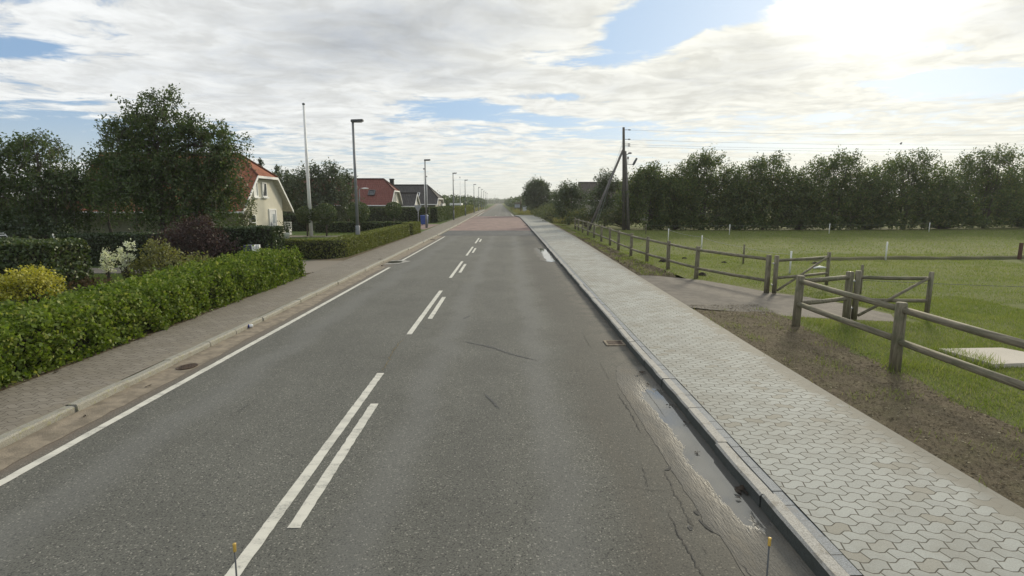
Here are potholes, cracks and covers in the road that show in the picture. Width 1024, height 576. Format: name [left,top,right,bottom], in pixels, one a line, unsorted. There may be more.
crack [626,467,706,575]
